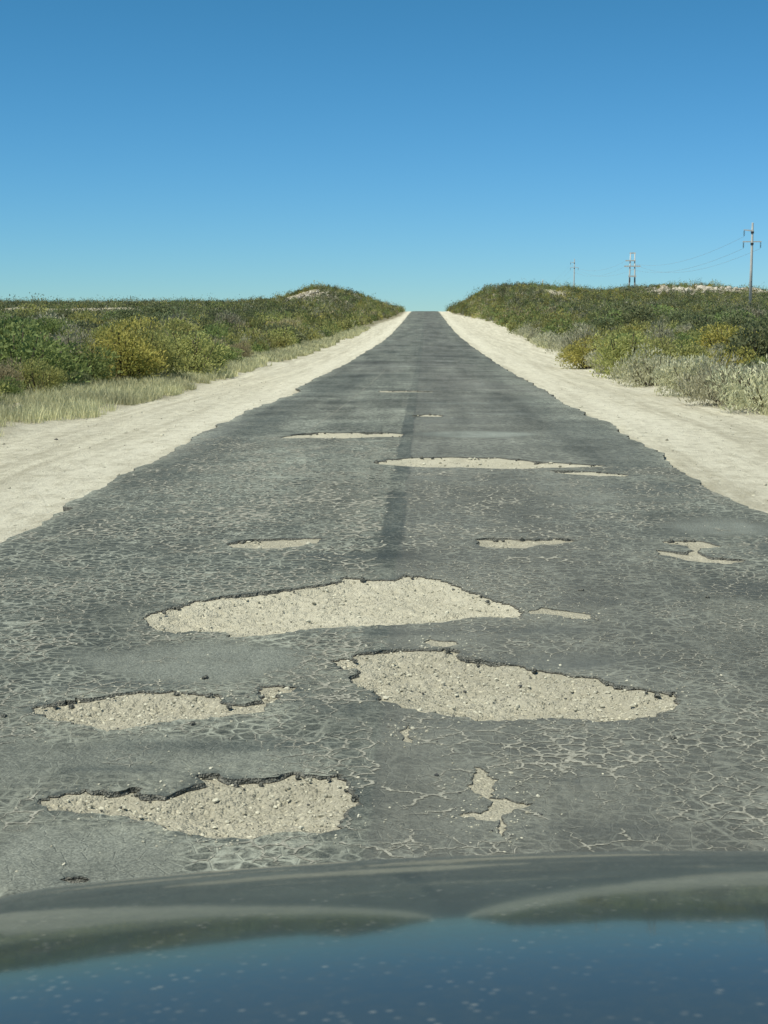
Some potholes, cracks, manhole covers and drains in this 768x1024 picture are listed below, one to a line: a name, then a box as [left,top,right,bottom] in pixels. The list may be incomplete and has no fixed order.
pothole [459,766,533,837]
